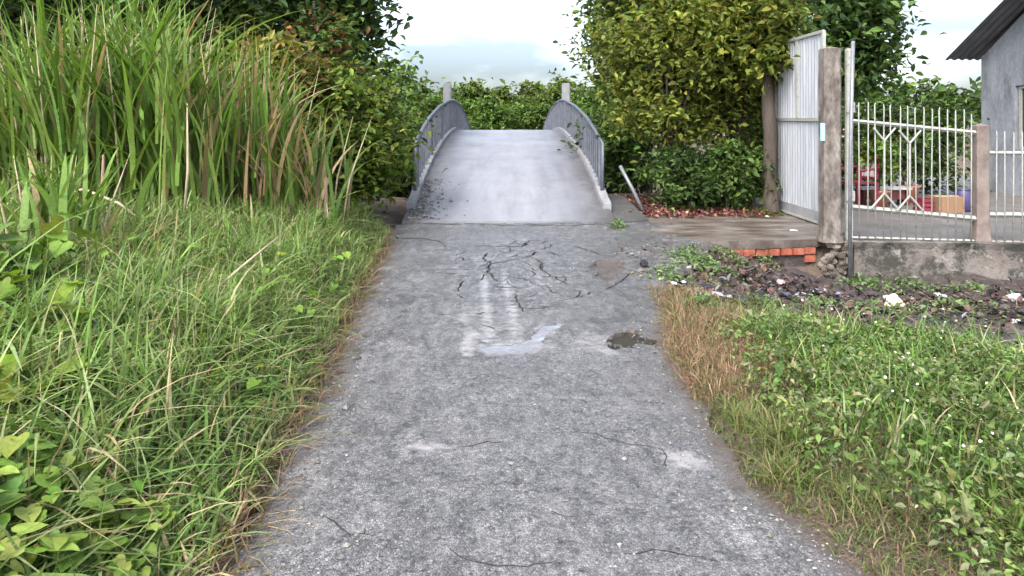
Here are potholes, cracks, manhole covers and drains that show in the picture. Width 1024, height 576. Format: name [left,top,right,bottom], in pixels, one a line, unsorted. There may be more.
crack [391,223,665,329]
crack [624,549,704,557]
crack [315,514,376,536]
crack [522,431,667,466]
crack [449,548,552,567]
pothole [600,327,657,350]
